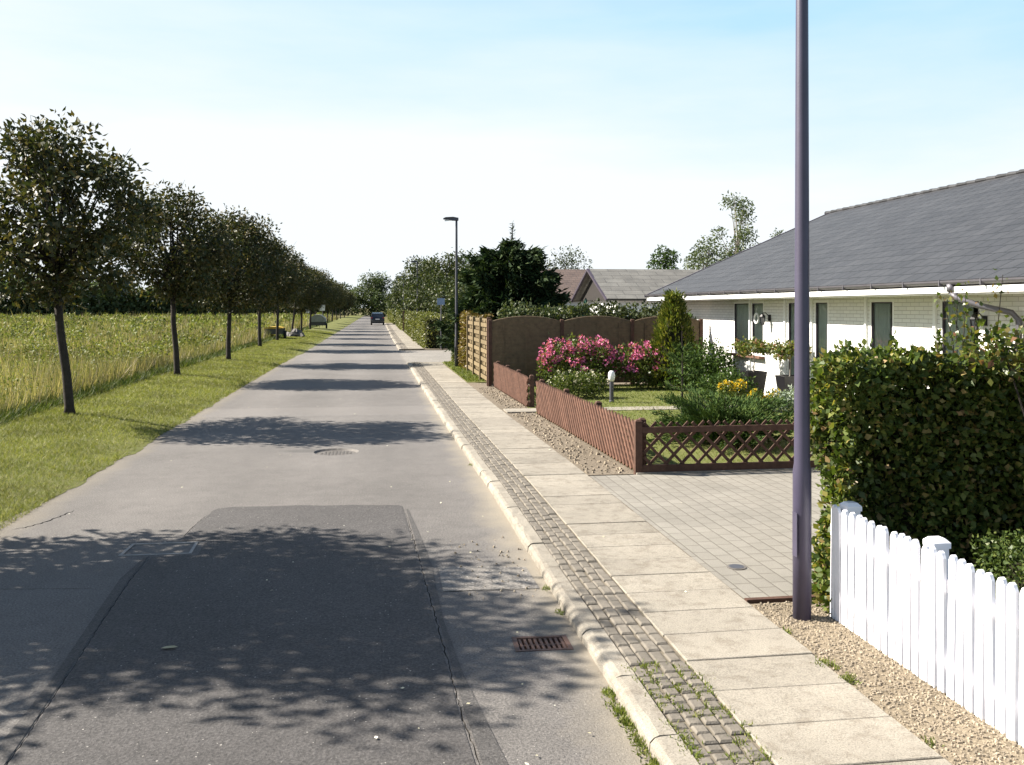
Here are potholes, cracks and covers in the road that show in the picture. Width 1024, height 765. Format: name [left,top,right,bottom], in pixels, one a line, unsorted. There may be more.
drain grate [512,635,573,652]
manhole cover [118,542,198,556]
